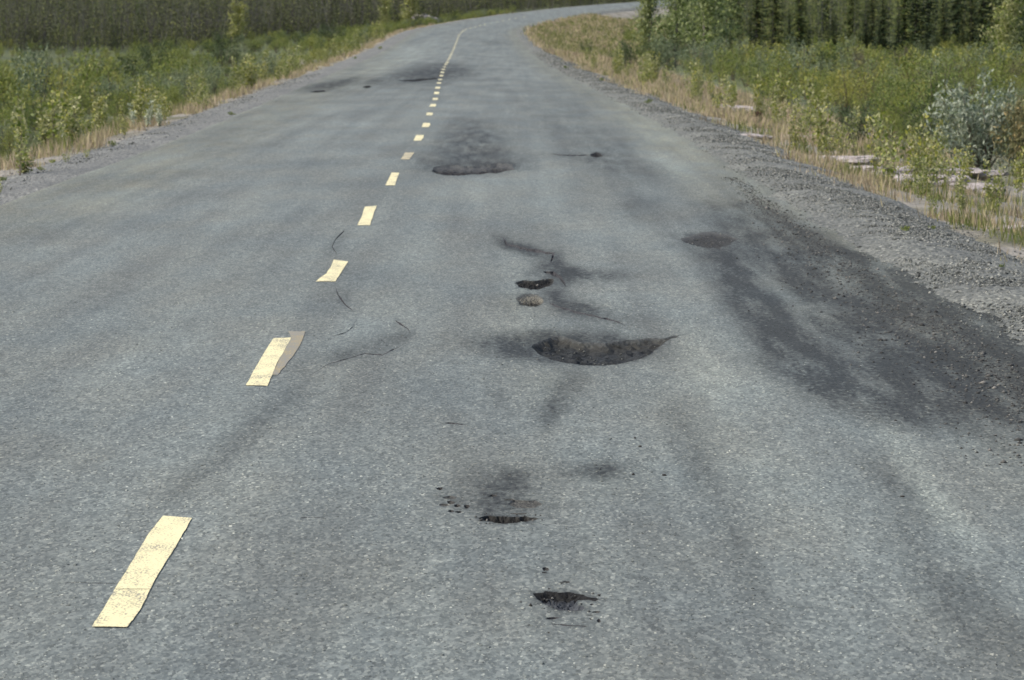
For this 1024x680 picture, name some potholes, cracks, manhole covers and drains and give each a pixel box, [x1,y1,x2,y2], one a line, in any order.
pothole [436,487,542,524]
crack [311,320,410,375]
pothole [516,278,554,290]
pothole [520,567,601,633]
pothole [432,163,515,176]
pothole [676,231,740,249]
crack [332,231,355,336]
pothole [523,335,680,366]
